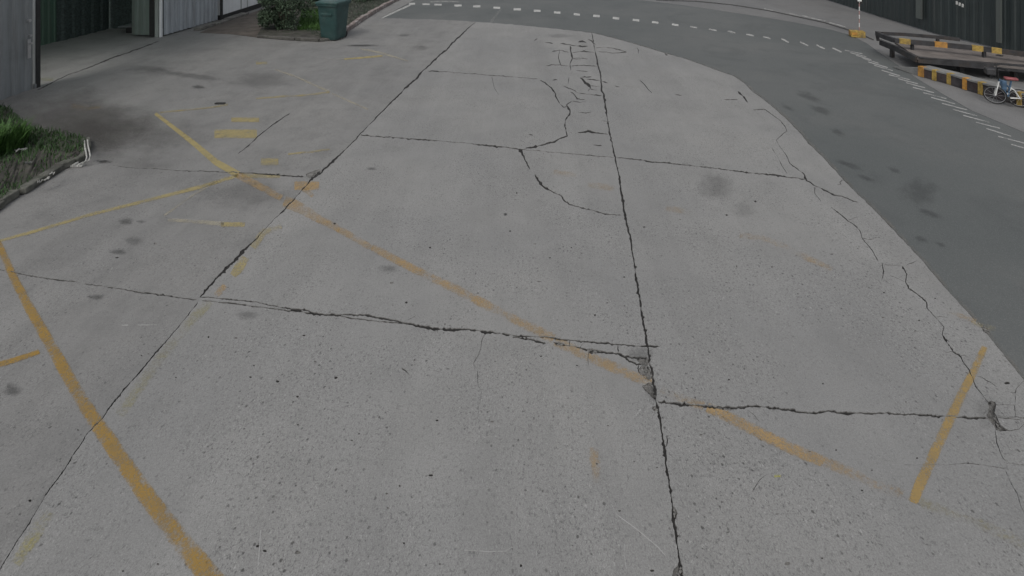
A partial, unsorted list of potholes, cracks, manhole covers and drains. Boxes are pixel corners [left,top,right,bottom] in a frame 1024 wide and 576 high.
pothole [987,403,1003,432]
crack [519,39,639,215]
pothole [639,367,653,380]
crack [203,297,654,398]
